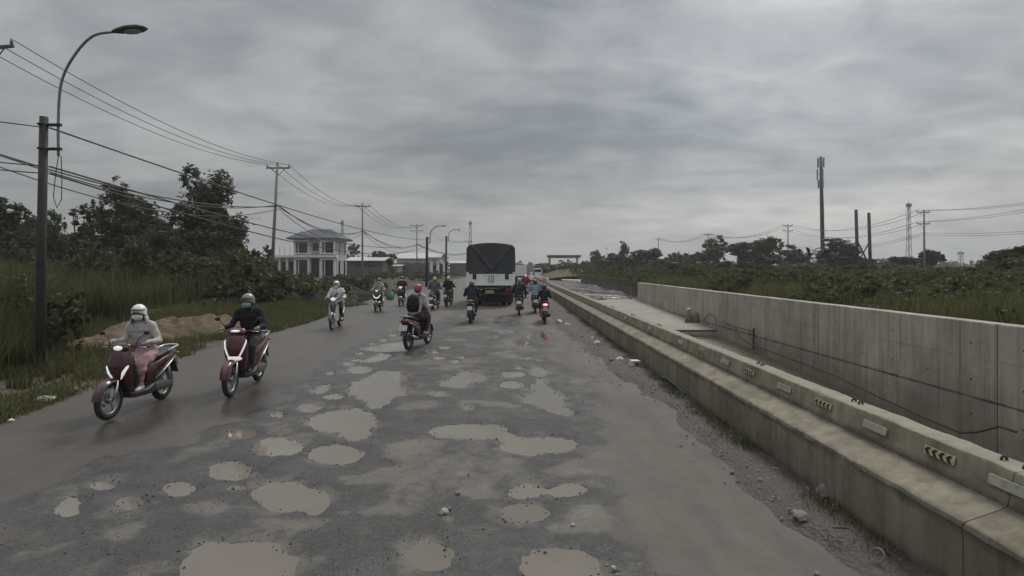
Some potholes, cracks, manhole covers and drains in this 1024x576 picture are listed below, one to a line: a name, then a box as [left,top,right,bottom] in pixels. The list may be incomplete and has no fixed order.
pothole [159,482,205,498]
pothole [516,547,601,576]
pothole [505,483,588,501]
pothole [519,377,578,416]
pothole [428,422,581,456]
pothole [308,441,365,466]
pothole [387,536,455,573]
pothole [205,461,260,482]
pothole [345,371,418,409]
pothole [251,436,308,457]
pothole [496,501,551,524]
pothole [44,494,94,517]
